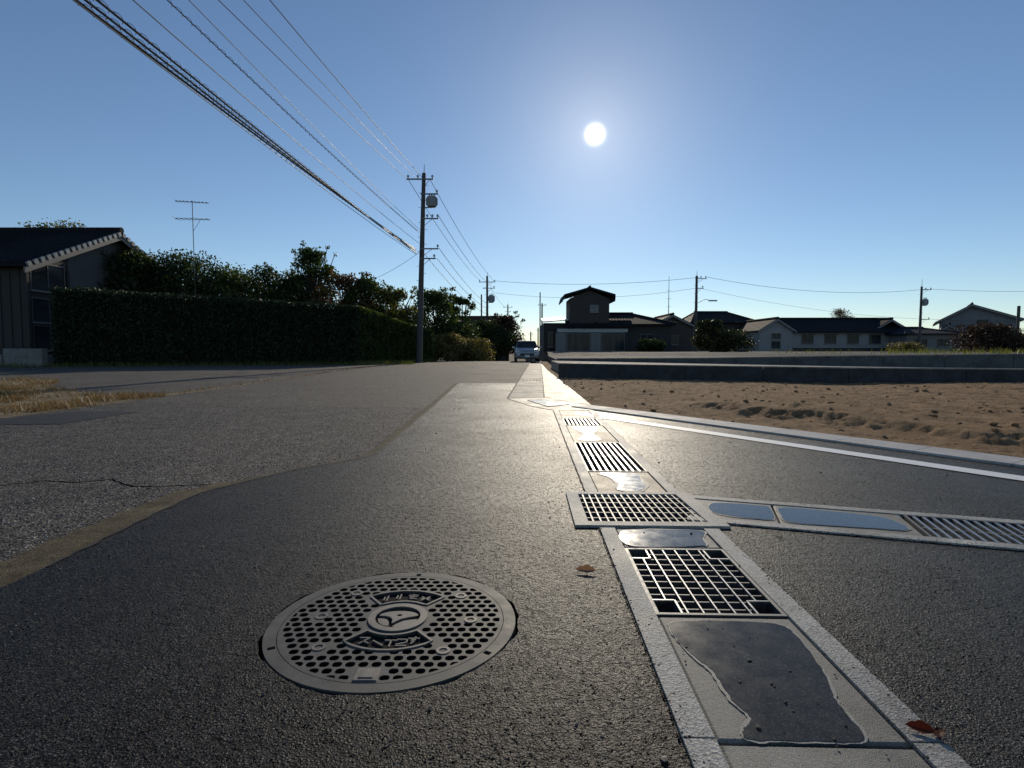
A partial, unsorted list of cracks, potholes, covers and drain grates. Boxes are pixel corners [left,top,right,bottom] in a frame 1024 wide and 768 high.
drain grate [902,514,1024,545]
drain grate [574,442,648,473]
manhole cover [262,573,515,695]
drain grate [562,418,603,426]
crack [8,479,210,489]
drain grate [625,548,788,619]
